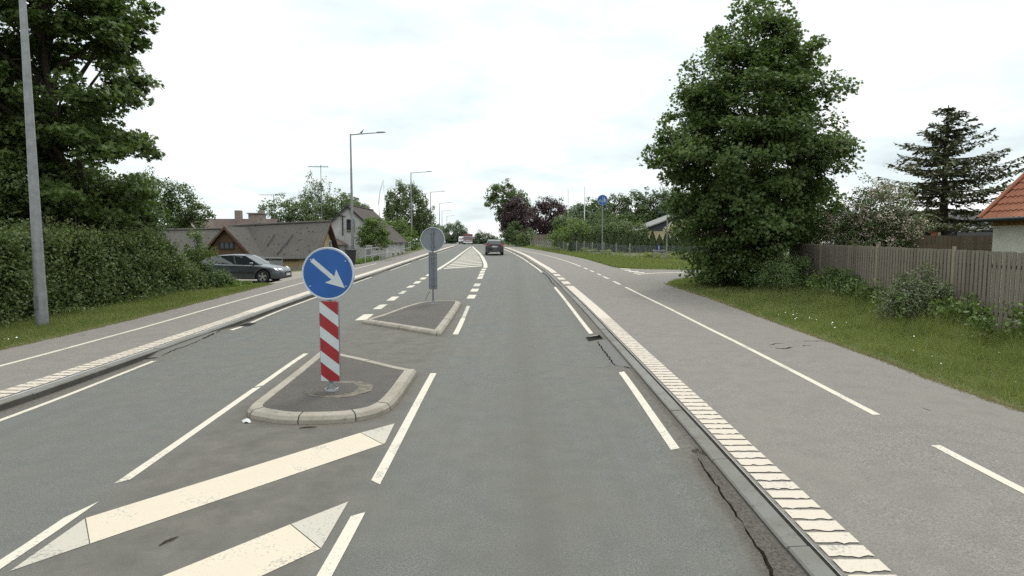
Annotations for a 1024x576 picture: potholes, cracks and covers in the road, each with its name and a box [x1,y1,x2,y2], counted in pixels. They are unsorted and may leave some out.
crack [147,329,223,359]
crack [698,459,774,576]
